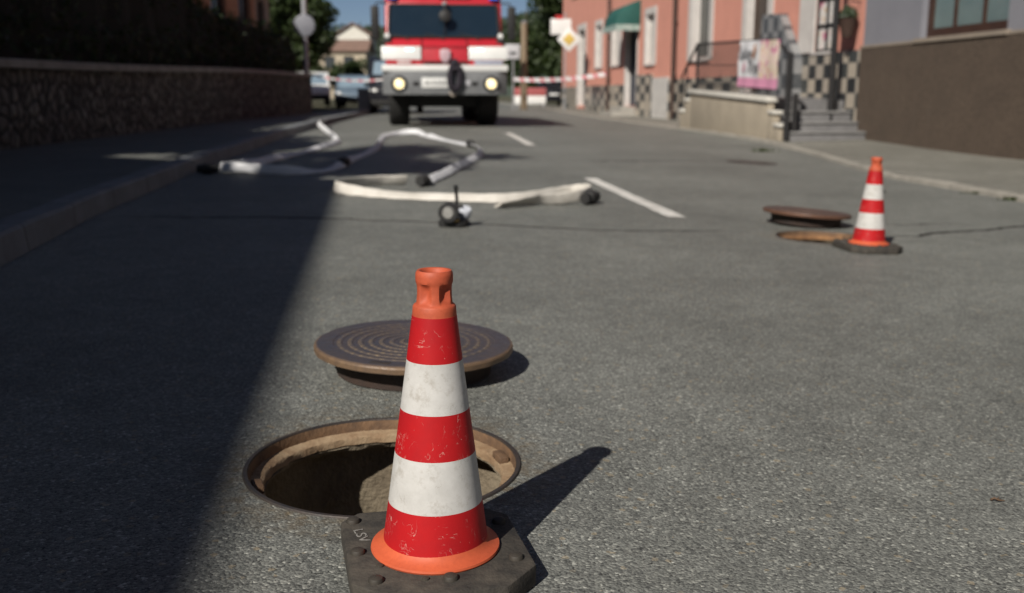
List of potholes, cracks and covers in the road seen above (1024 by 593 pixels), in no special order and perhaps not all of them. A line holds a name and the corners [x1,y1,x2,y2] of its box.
crack [885,224,1024,237]
manhole cover [314,319,513,392]
manhole cover [242,417,521,519]
manhole cover [763,206,852,228]
manhole cover [775,231,853,245]
